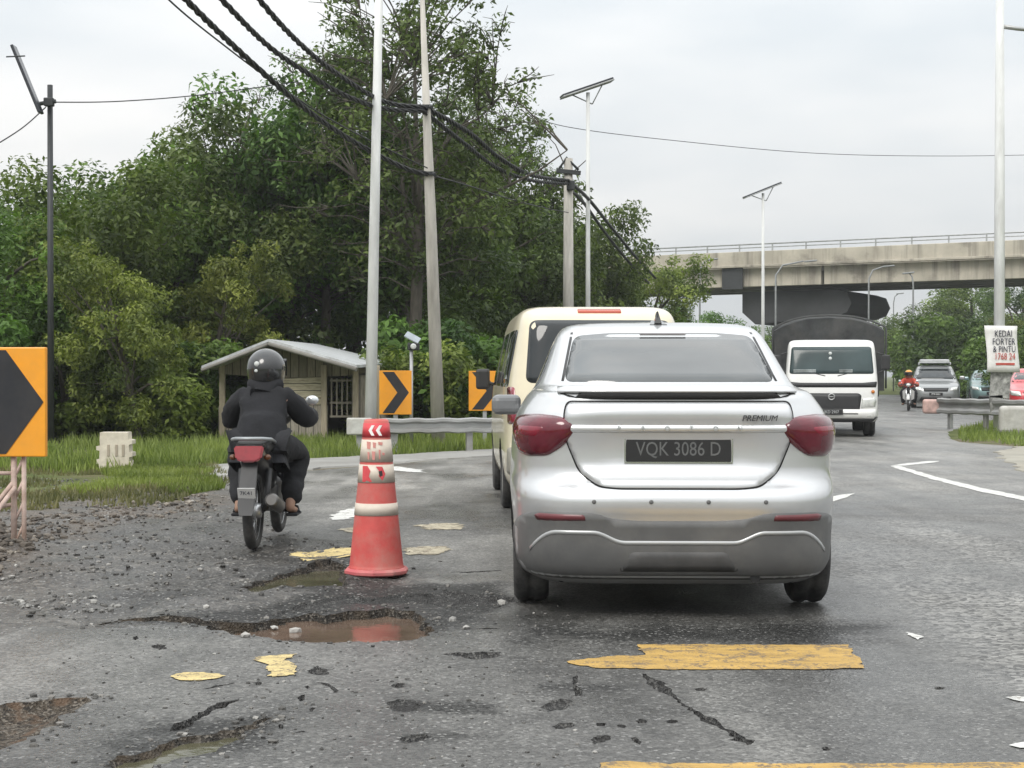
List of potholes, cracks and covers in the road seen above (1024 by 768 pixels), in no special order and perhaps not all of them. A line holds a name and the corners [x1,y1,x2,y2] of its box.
pothole [98,608,435,636]
crack [643,674,755,745]
pothole [241,559,348,589]
pothole [105,714,278,768]
pothole [0,696,91,750]
pothole [387,699,422,712]
pothole [441,652,502,660]
